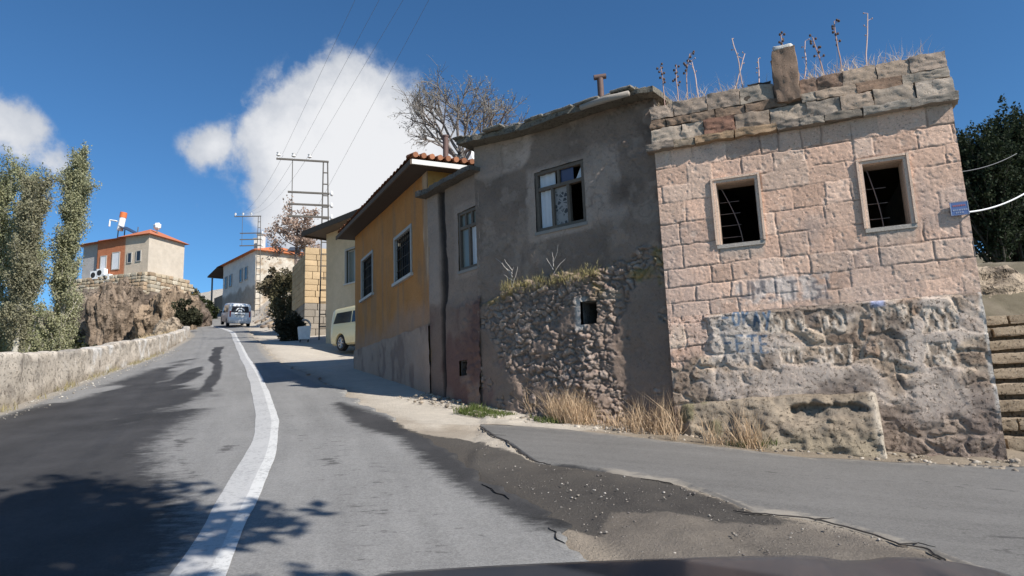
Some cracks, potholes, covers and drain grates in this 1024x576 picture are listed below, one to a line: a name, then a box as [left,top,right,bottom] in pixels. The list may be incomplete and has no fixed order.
crack [733,510,946,561]
